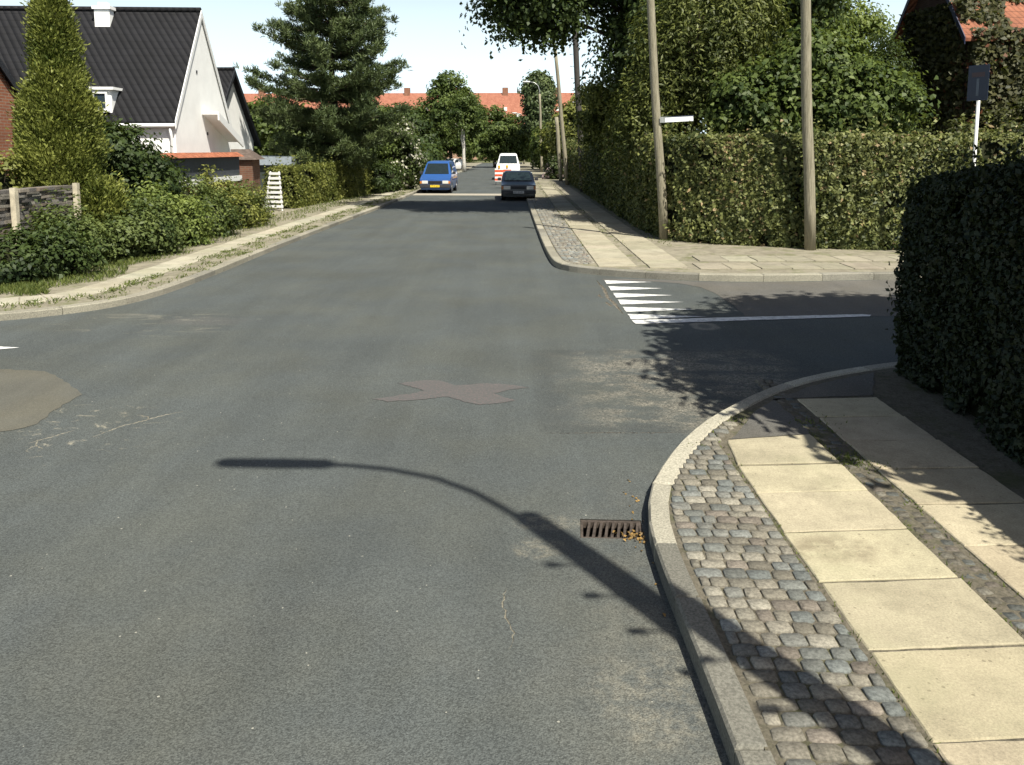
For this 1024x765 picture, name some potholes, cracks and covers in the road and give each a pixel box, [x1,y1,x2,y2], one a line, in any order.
crack [502,591,515,646]
drain grate [580,519,644,539]
crack [94,412,178,437]
